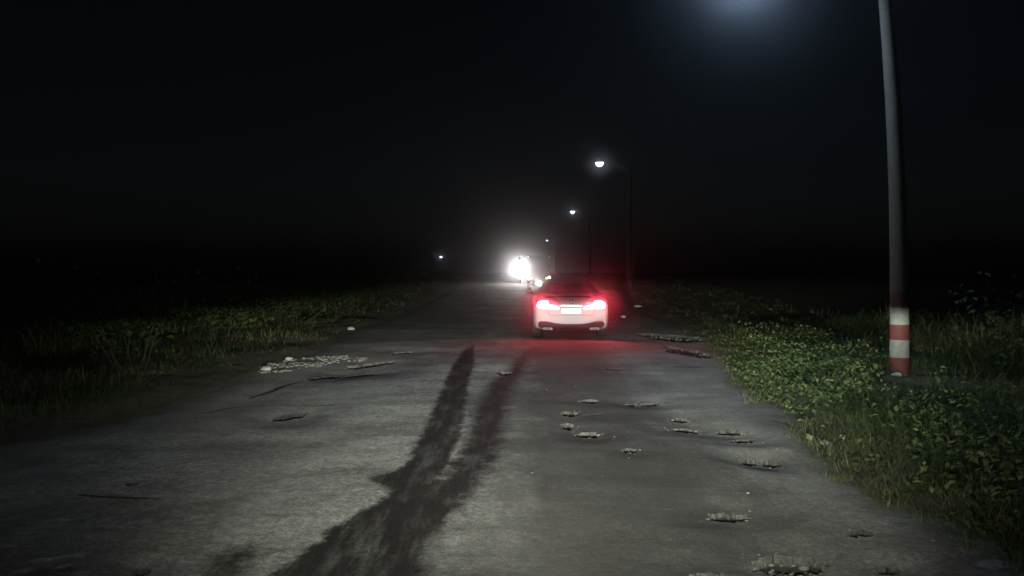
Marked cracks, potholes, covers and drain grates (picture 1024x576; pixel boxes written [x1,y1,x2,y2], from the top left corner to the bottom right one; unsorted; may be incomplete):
pothole [631,333,704,342]
pothole [663,346,717,359]
pothole [845,530,874,539]
crack [194,382,342,415]
pothole [705,513,751,523]
pothole [742,554,833,576]
pothole [272,413,309,422]
